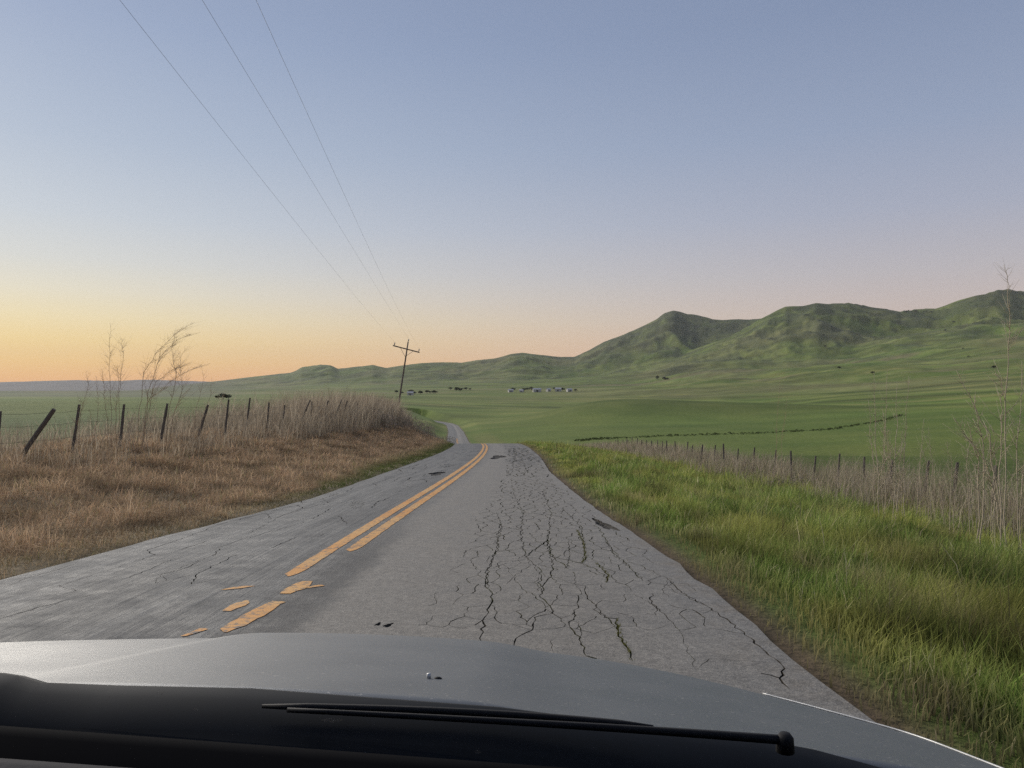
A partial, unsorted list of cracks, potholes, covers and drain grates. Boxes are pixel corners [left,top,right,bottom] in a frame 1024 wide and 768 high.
pothole [592,518,620,531]
crack [8,464,453,617]
crack [425,448,790,689]
